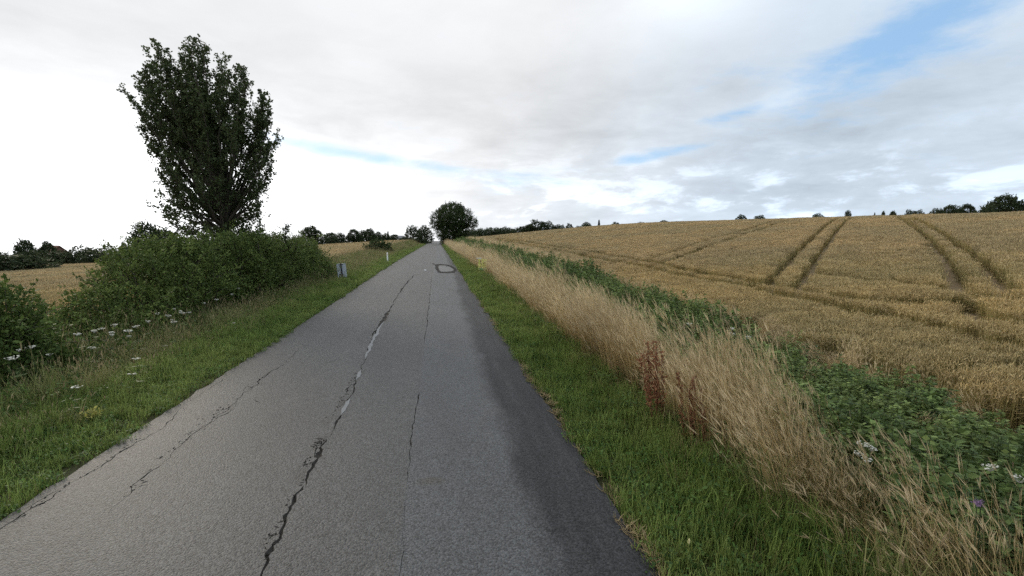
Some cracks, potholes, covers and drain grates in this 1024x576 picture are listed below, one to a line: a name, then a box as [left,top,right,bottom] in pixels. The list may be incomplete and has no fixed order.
crack [0,344,309,530]
crack [260,275,432,576]
